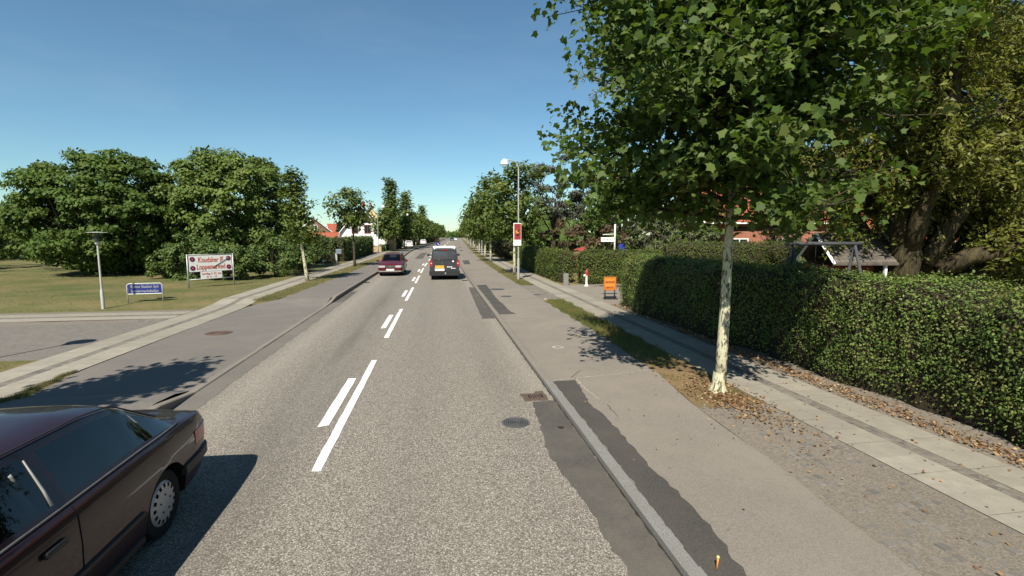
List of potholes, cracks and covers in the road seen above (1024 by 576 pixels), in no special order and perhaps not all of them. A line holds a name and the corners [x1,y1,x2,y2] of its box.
manhole cover [502,417,530,428]
